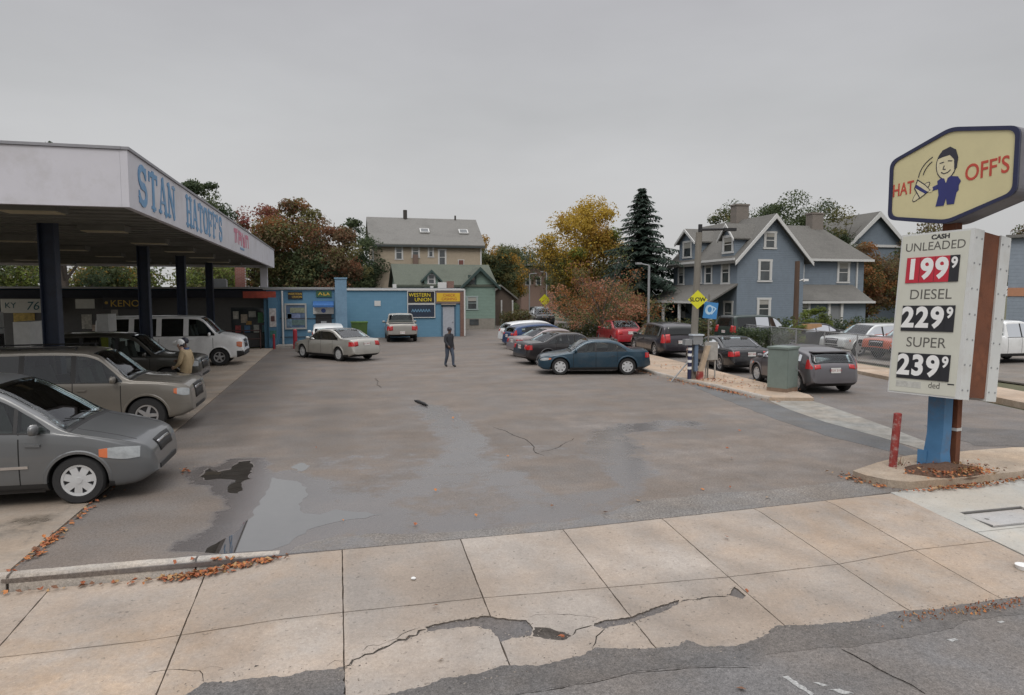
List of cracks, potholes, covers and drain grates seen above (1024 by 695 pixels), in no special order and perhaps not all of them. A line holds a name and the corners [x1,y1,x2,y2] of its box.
crack [331,588,745,668]
crack [843,650,925,694]
pothole [532,627,571,640]
manhole cover [960,506,1024,528]
